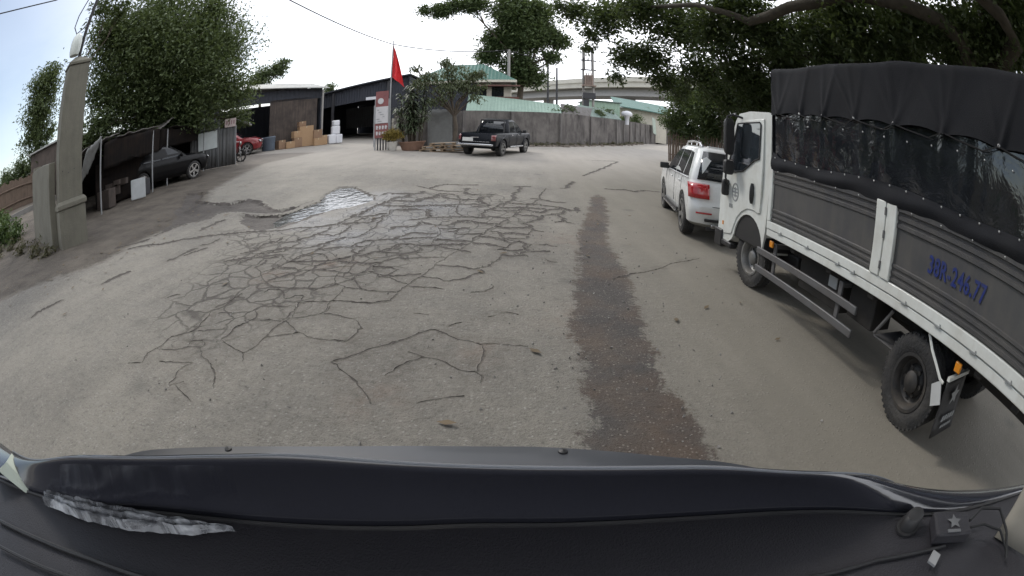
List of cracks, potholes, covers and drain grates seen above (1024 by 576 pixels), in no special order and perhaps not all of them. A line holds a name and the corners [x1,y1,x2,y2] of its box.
crack [31,299,64,318]
crack [114,160,658,404]
crack [102,271,131,285]
pothole [234,186,381,231]
crack [617,258,700,278]
